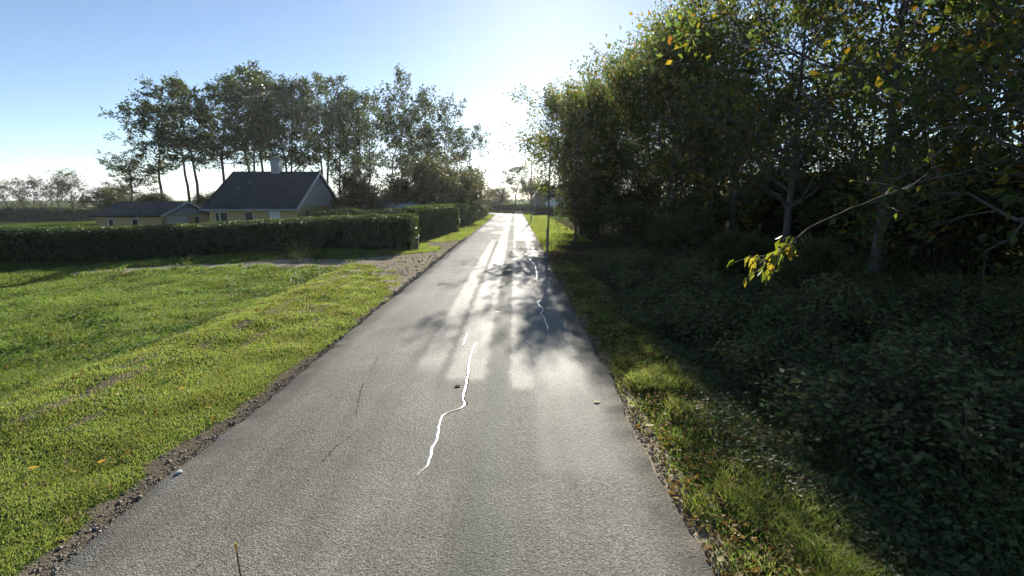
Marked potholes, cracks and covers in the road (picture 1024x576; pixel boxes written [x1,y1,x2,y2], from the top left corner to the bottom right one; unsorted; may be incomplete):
crack [320,359,377,465]
